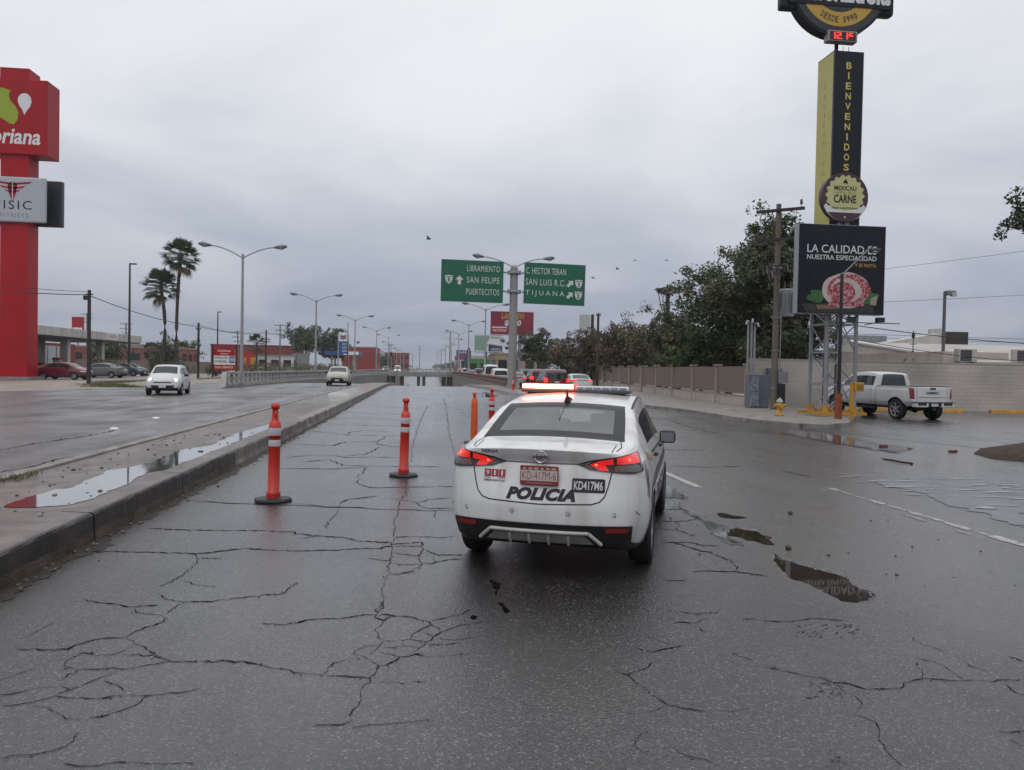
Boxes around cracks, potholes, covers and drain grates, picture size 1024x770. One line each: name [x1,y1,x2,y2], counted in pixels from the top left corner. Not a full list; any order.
crack [1,582,309,758]
crack [155,393,484,727]
crack [620,636,748,714]
crack [742,618,860,638]
pothole [722,526,777,546]
pothole [770,554,877,604]
crack [733,637,1023,766]
